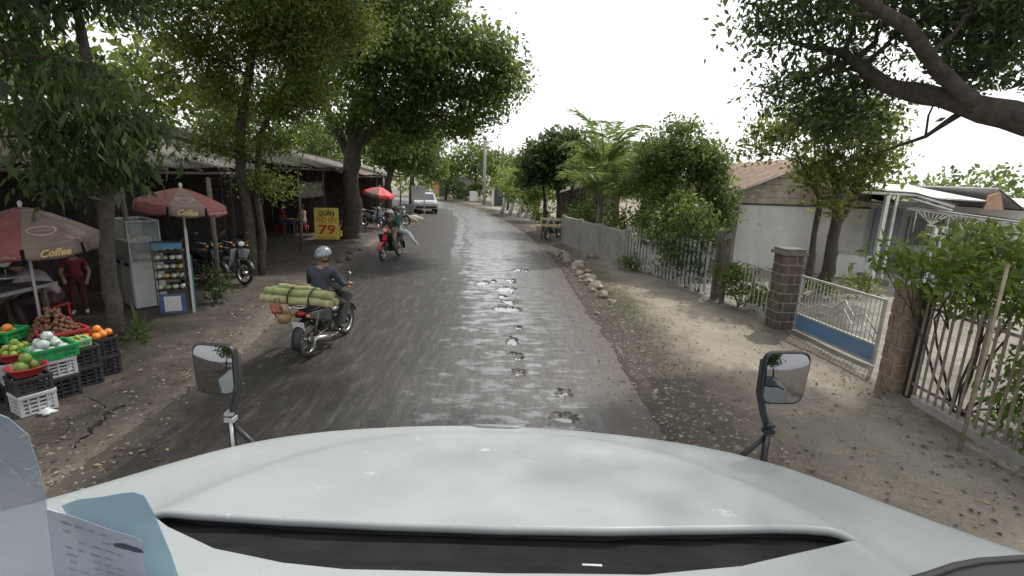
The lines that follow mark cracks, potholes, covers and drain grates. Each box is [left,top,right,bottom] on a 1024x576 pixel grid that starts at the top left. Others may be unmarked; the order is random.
pothole [554,387,573,398]
pothole [511,368,528,377]
crack [46,373,136,448]
pothole [548,410,580,424]
pothole [496,286,517,294]
pothole [506,351,524,360]
